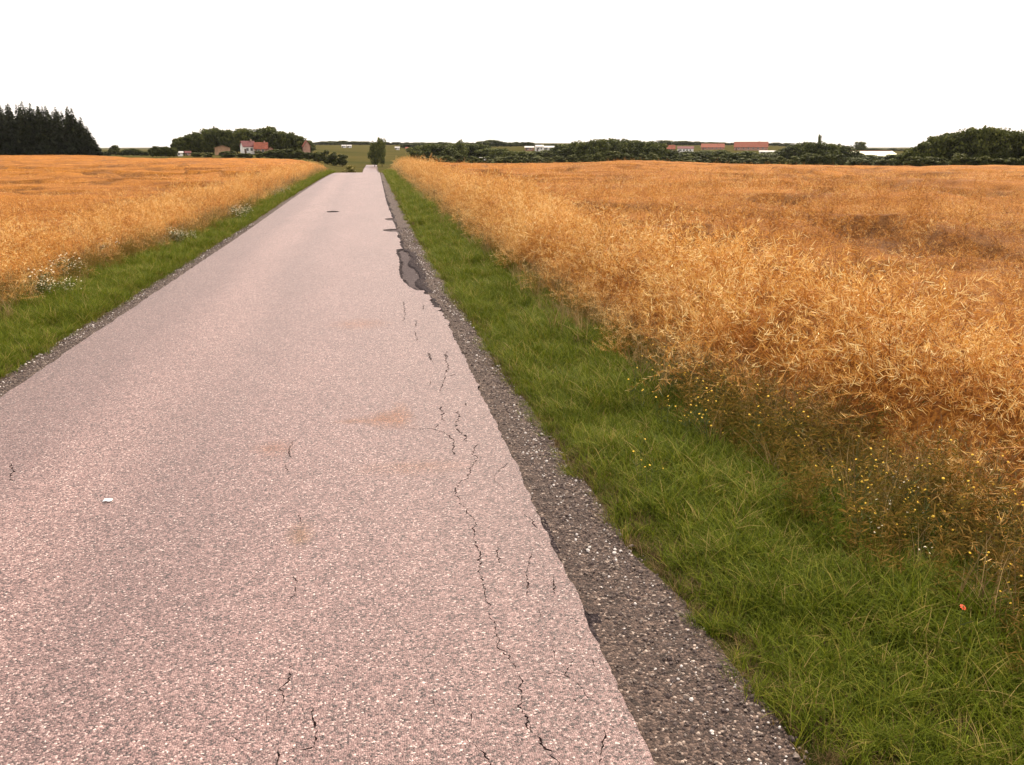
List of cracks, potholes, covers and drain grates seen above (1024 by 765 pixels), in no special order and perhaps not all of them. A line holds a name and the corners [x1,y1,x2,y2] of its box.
crack [266,664,317,765]
crack [455,461,607,765]
pothole [396,249,420,290]
